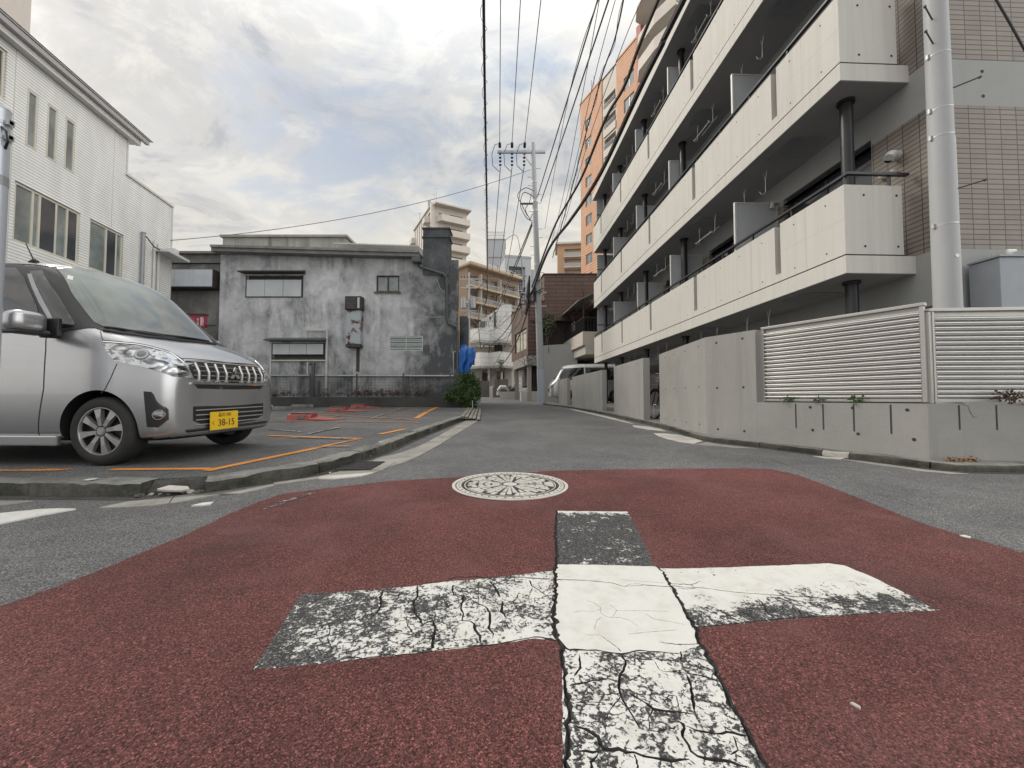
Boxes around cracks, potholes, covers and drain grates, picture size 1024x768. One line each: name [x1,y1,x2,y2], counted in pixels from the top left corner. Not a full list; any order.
drain grate [329,460,385,472]
manhole cover [452,472,568,501]
